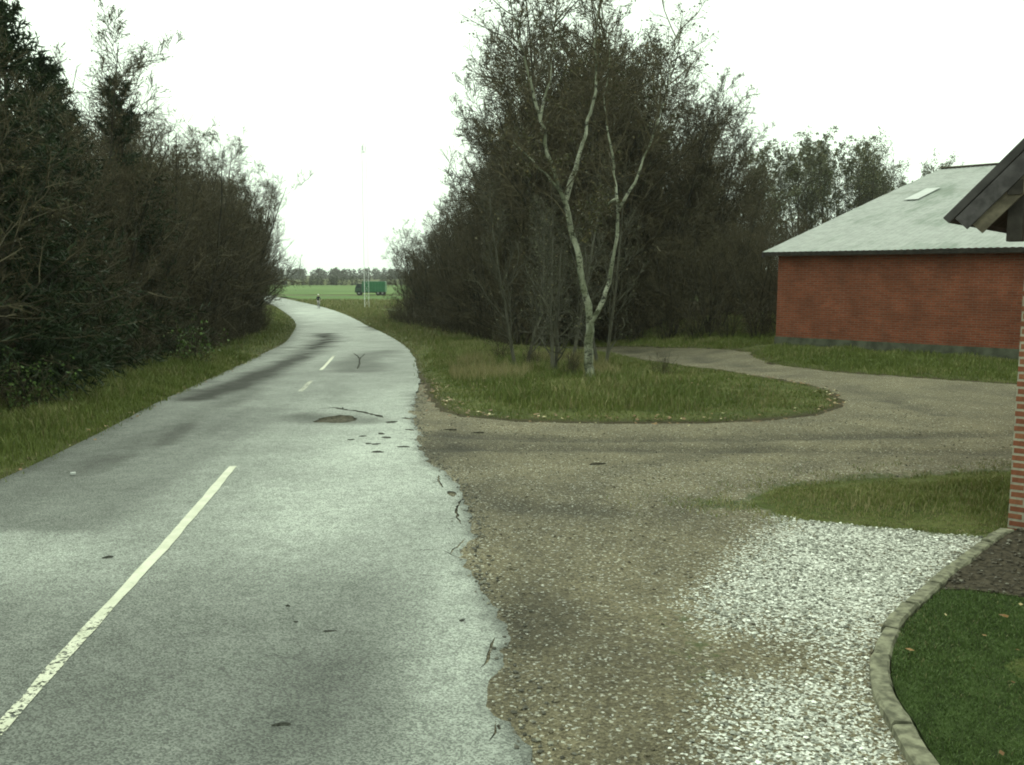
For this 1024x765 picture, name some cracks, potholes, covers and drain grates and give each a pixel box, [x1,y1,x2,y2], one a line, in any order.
crack [331,407,383,417]
crack [433,475,461,522]
pothole [313,415,357,423]
